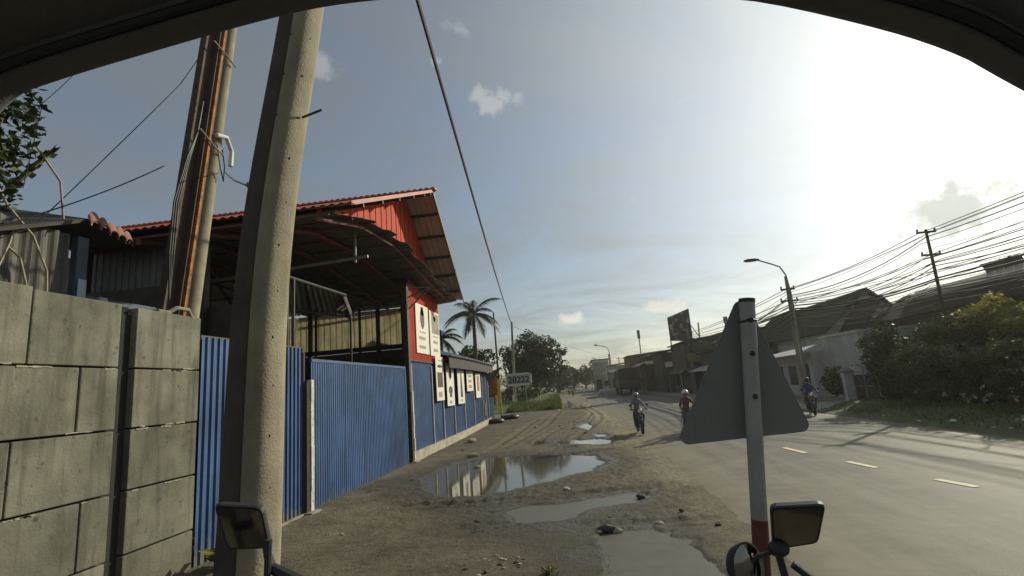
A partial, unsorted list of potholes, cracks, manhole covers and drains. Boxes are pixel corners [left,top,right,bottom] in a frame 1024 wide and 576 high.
pothole [553,437,617,445]
pothole [574,422,596,430]
pothole [584,524,728,576]
pothole [481,488,661,525]
pothole [416,452,616,498]
